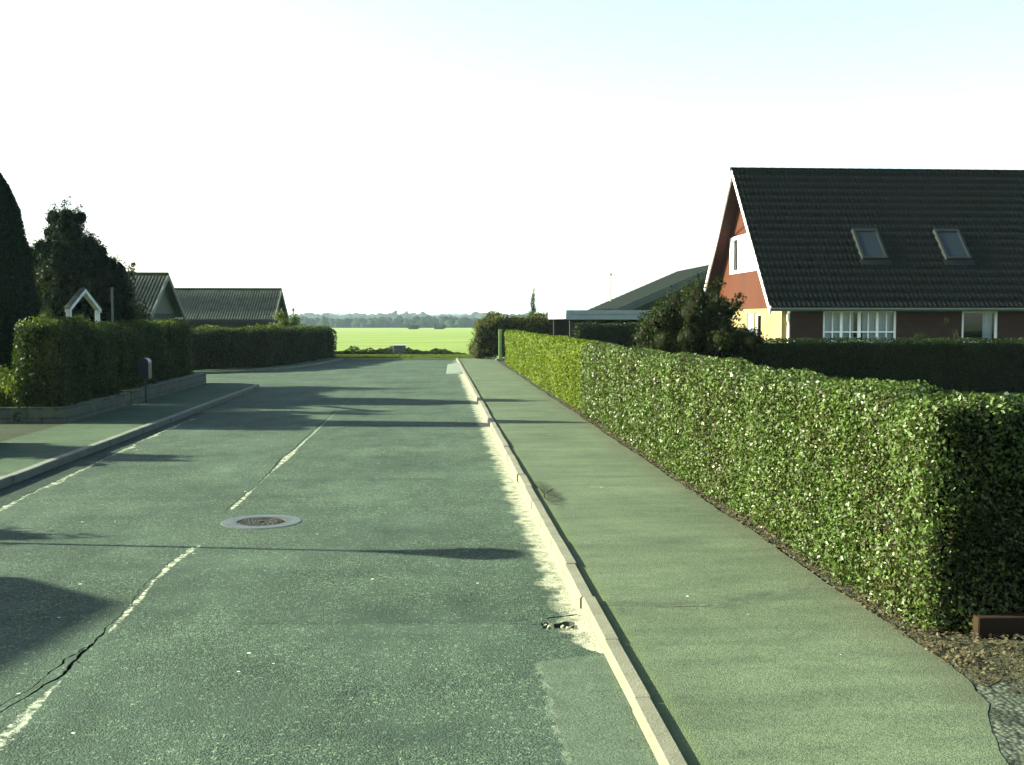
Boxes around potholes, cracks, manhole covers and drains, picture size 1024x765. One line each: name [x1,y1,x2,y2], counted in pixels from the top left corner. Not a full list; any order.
manhole cover [220,515,303,529]
crack [0,544,199,712]
crack [226,410,336,511]
pothole [554,621,578,630]
